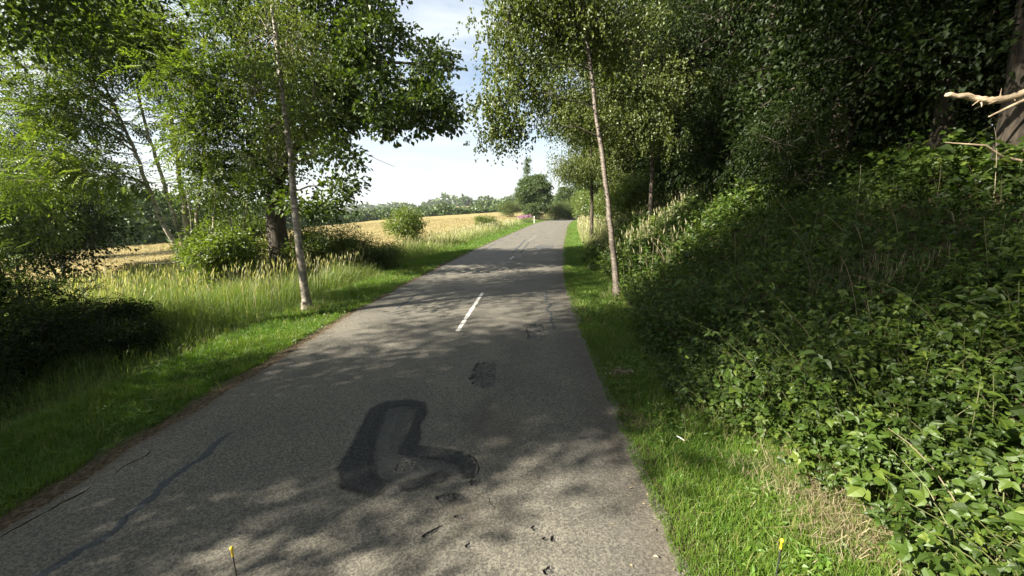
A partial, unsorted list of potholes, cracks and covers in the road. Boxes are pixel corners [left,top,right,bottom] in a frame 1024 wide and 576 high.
crack [0,484,96,538]
pothole [435,493,468,502]
pothole [395,462,414,473]
pothole [525,323,548,341]
